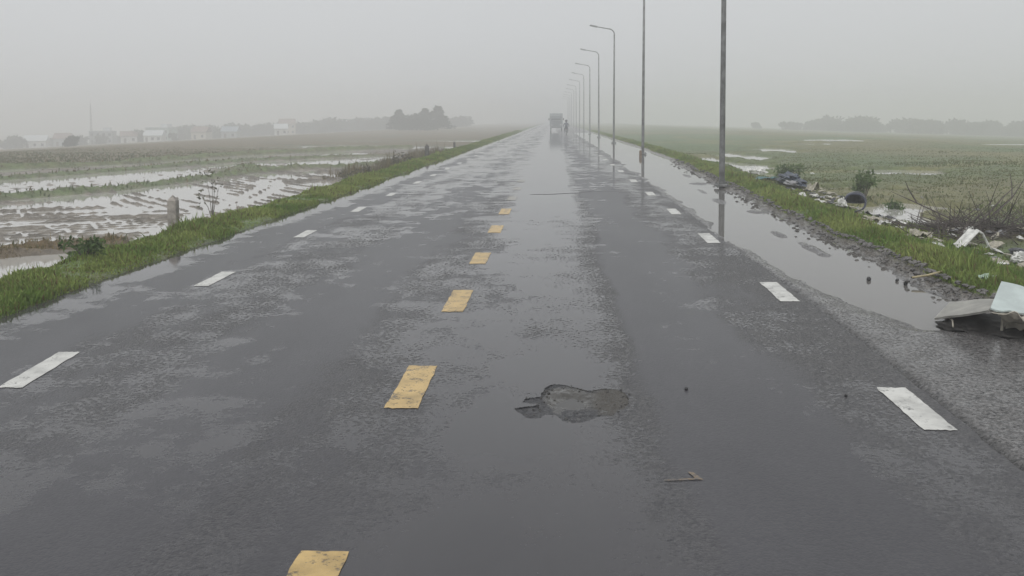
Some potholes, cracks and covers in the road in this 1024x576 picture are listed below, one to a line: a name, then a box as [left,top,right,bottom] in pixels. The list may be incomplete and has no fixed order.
pothole [515,384,631,423]
